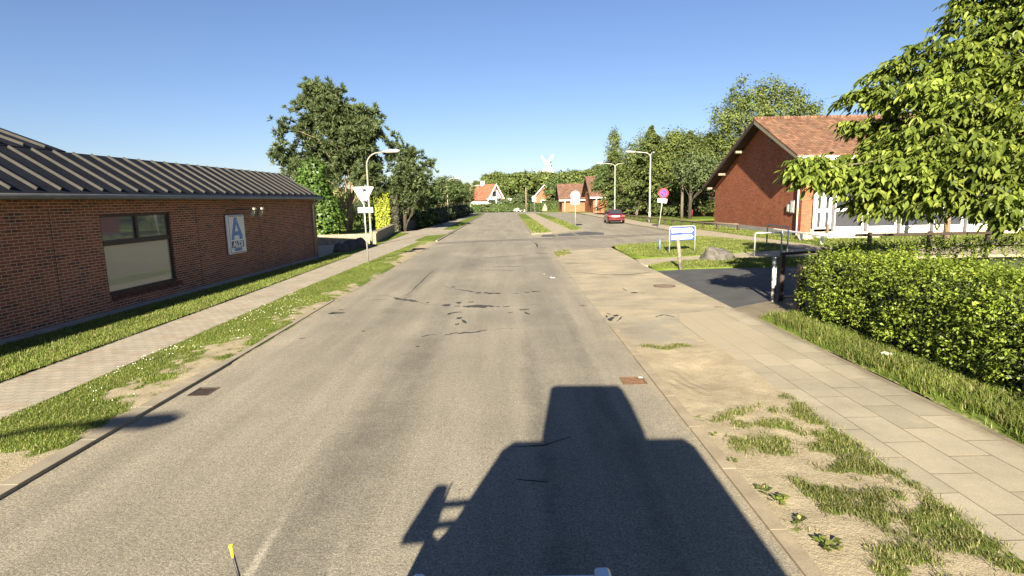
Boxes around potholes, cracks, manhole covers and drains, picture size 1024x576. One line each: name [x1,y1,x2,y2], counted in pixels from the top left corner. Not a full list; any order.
drain grate [187,387,220,396]
crack [374,285,537,337]
